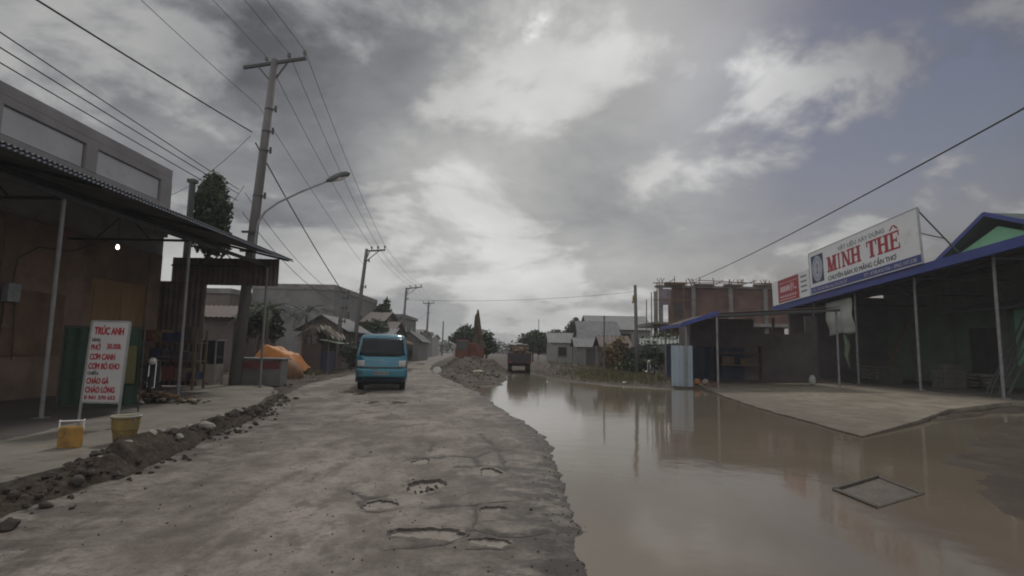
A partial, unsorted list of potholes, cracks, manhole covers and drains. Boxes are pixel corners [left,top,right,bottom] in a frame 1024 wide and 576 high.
pothole [402,477,452,496]
pothole [477,505,513,513]
crack [404,435,506,471]
pothole [478,467,505,477]
pothole [376,525,478,543]
crack [383,499,548,551]
manhole cover [832,474,925,509]
pothole [356,499,403,512]
pothole [462,536,518,550]
